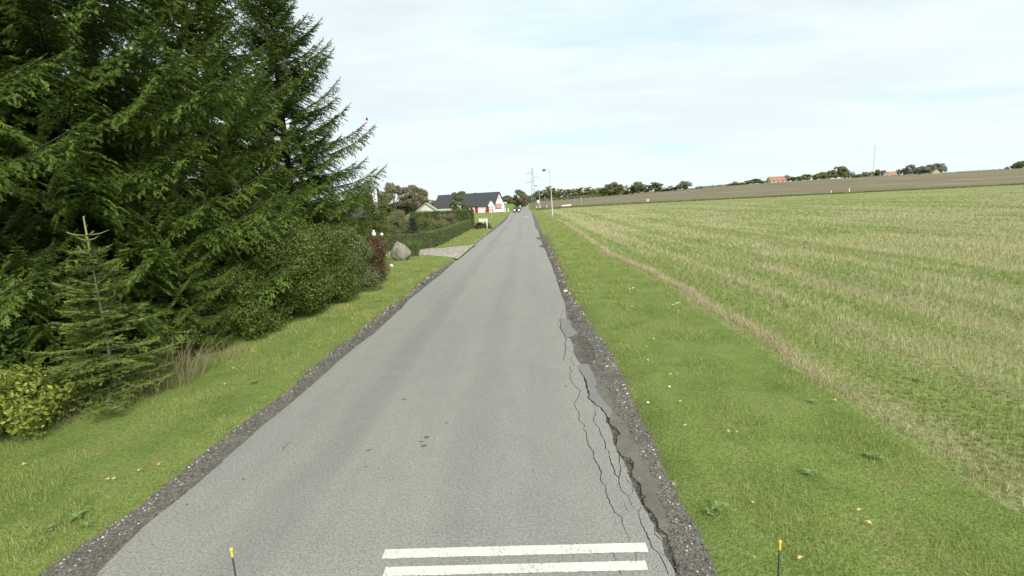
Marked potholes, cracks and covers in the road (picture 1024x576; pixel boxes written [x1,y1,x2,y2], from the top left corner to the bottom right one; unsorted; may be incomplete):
crack [558,311,669,575]
